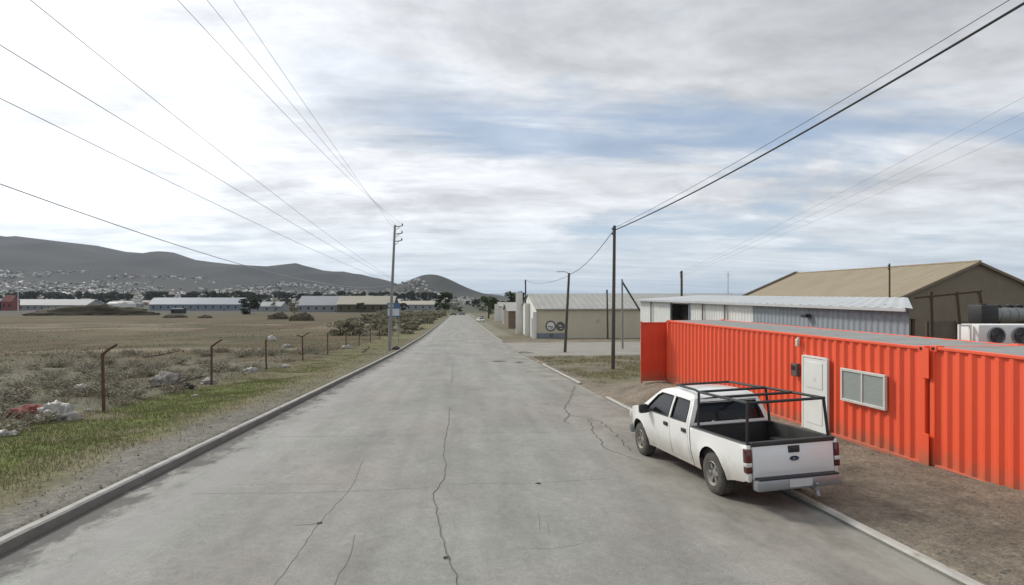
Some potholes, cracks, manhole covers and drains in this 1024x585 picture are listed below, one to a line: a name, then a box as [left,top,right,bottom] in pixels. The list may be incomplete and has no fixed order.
crack [275,461,363,585]
crack [561,386,639,461]
crack [433,407,459,585]
crack [537,514,593,549]
